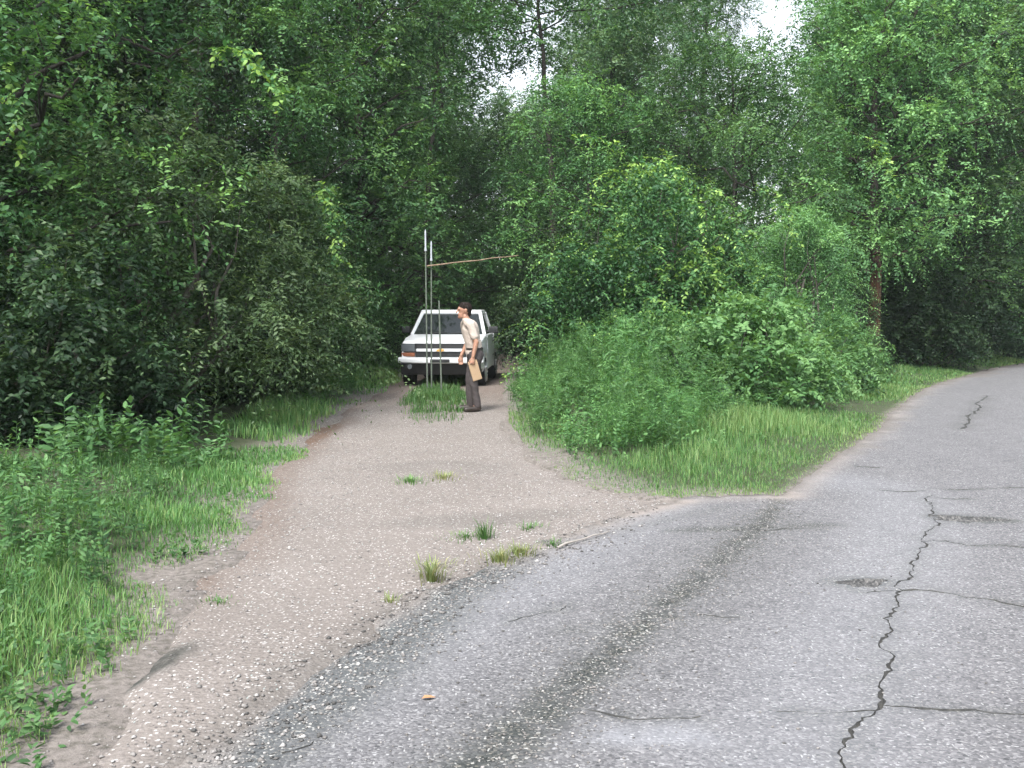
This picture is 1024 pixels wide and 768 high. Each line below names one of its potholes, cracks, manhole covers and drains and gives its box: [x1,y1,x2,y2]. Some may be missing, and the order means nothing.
crack [960,396,988,429]
crack [776,487,1024,768]
pothole [930,515,1010,523]
pothole [835,578,888,587]
crack [587,709,701,720]
